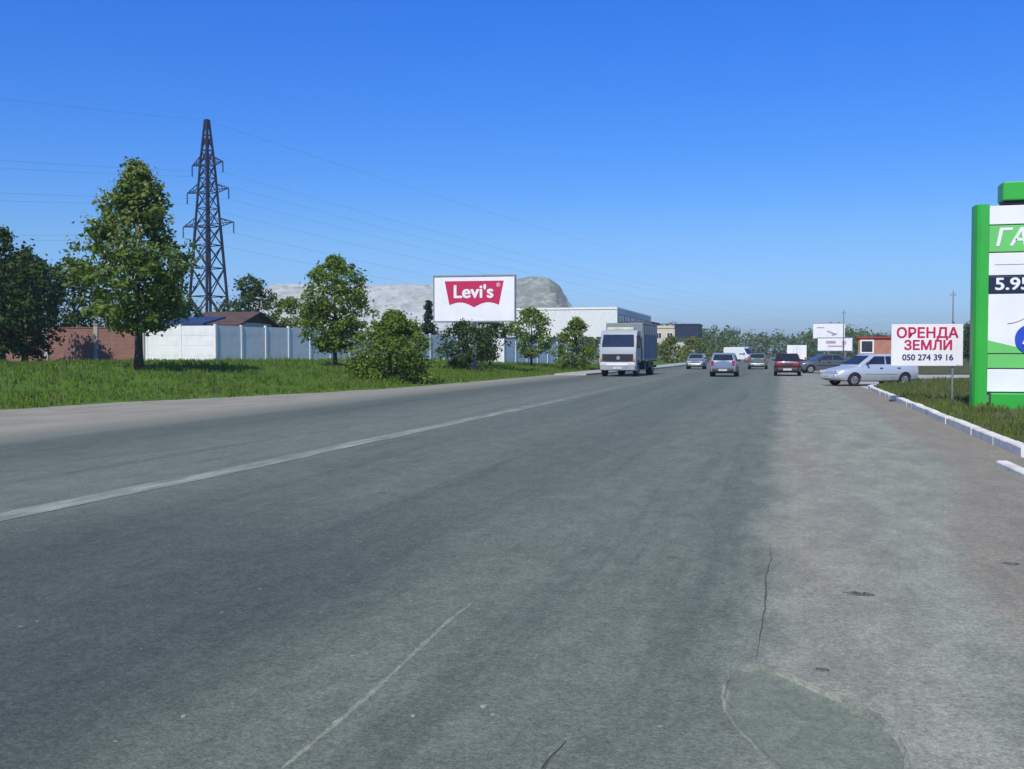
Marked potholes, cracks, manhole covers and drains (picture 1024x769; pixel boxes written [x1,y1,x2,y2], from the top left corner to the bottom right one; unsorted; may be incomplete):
crack [541,741,566,769]
crack [756,552,772,659]
